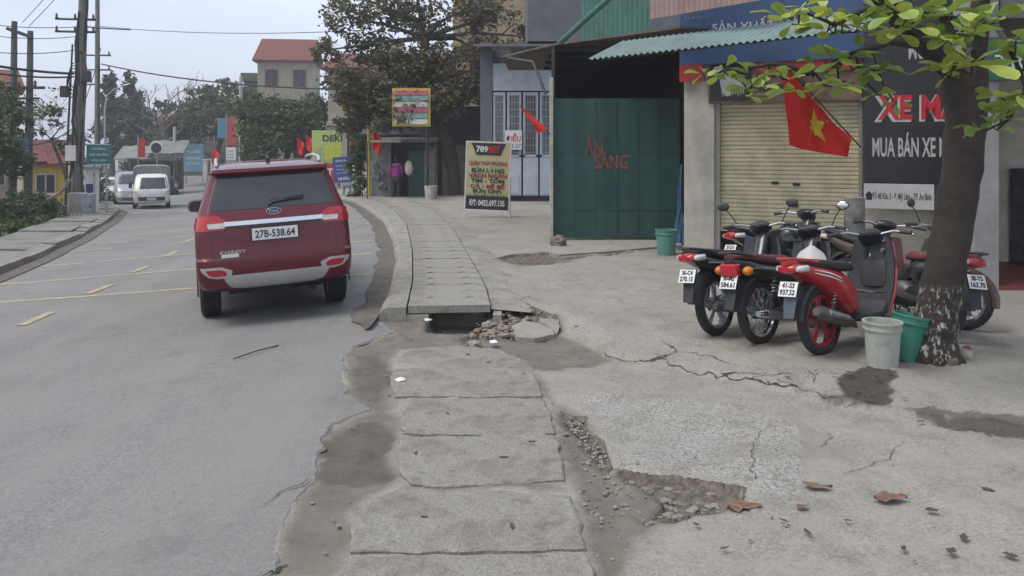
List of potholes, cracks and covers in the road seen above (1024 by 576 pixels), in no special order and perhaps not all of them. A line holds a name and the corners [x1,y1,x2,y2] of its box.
pothole [615,469,747,525]
pothole [460,303,559,345]
pothole [560,411,613,477]
crack [604,341,882,406]
pothole [498,253,559,265]
